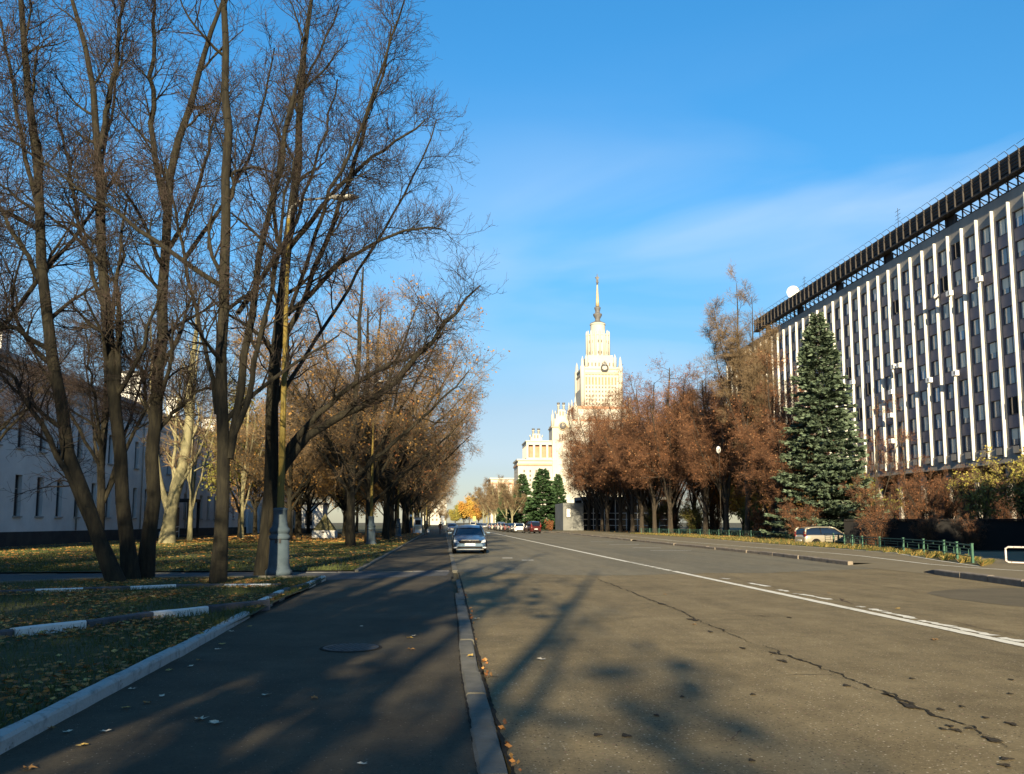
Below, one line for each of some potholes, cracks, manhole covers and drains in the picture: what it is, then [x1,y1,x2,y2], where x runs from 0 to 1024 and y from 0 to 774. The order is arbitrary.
crack [763,645,1019,750]
crack [598,566,747,642]
manhole cover [319,643,382,652]
